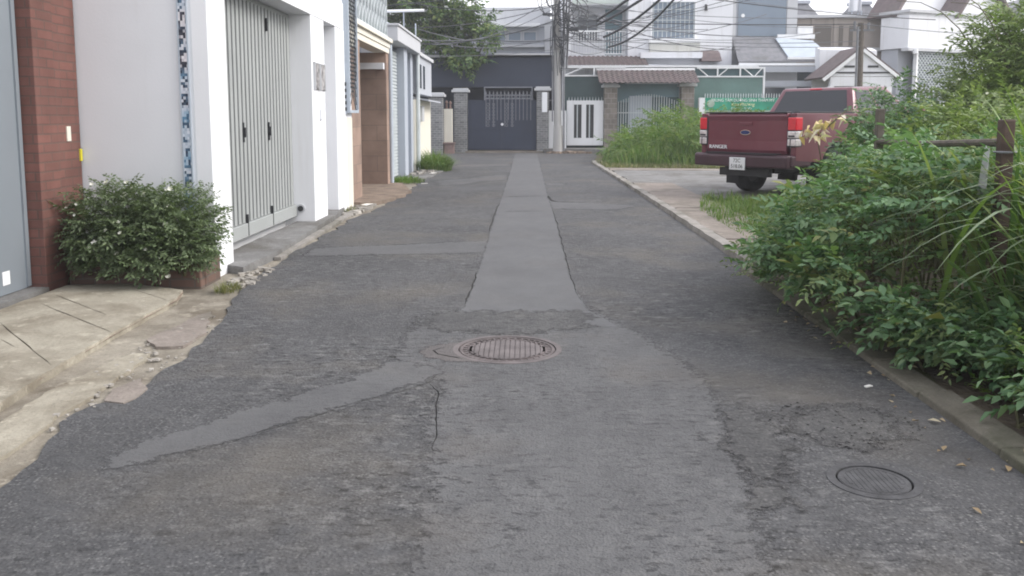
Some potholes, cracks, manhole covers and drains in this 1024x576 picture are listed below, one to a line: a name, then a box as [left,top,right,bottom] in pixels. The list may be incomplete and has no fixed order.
manhole cover [826,462,924,500]
manhole cover [453,335,562,364]
crack [228,380,439,450]
